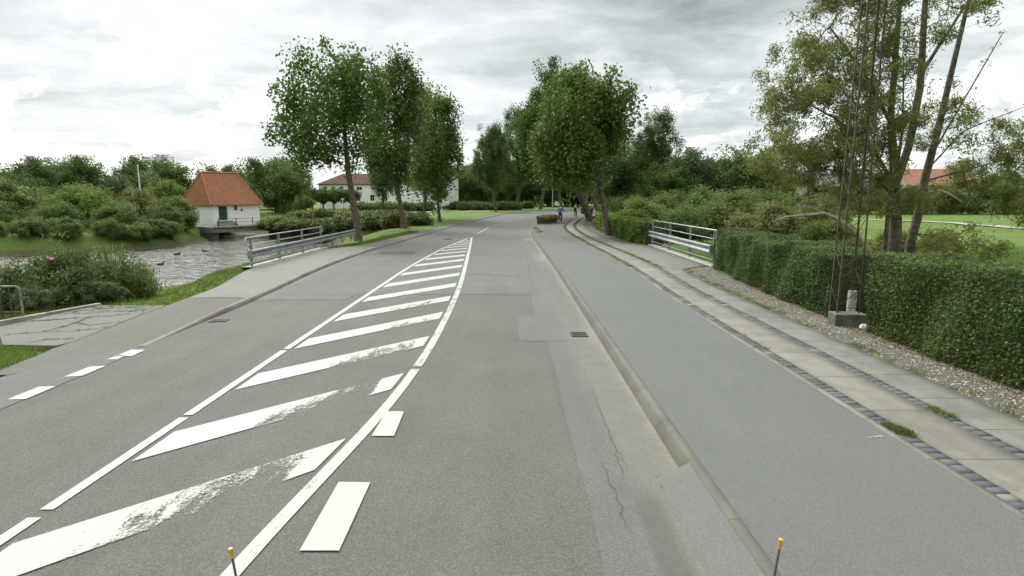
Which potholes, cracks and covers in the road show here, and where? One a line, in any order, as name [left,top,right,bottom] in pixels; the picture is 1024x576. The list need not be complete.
crack [592,389,628,525]
